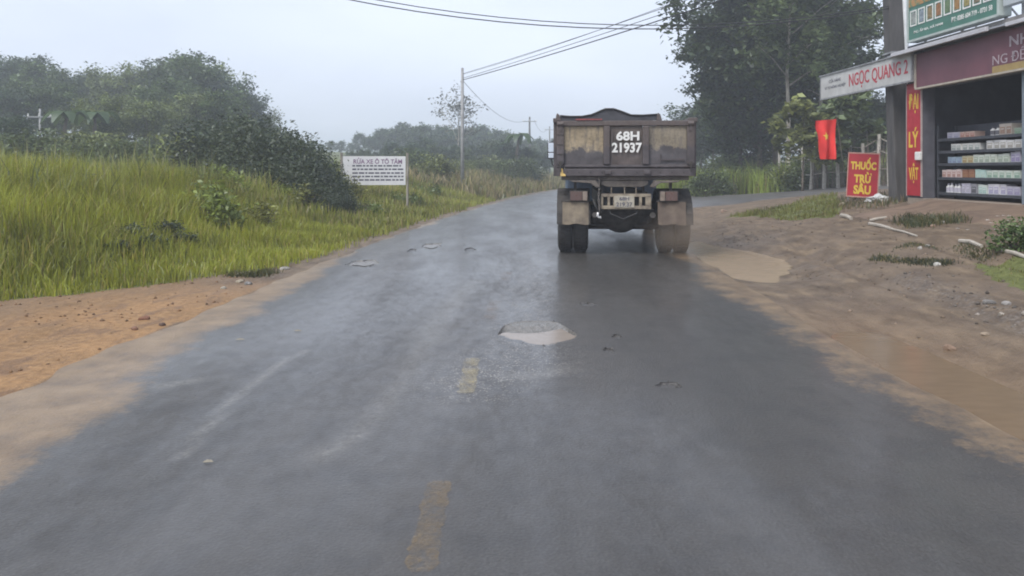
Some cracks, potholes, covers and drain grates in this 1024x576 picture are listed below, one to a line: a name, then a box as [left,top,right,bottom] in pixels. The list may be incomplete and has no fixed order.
pothole [498,320,577,346]
pothole [345,259,379,267]
pothole [653,380,682,388]
